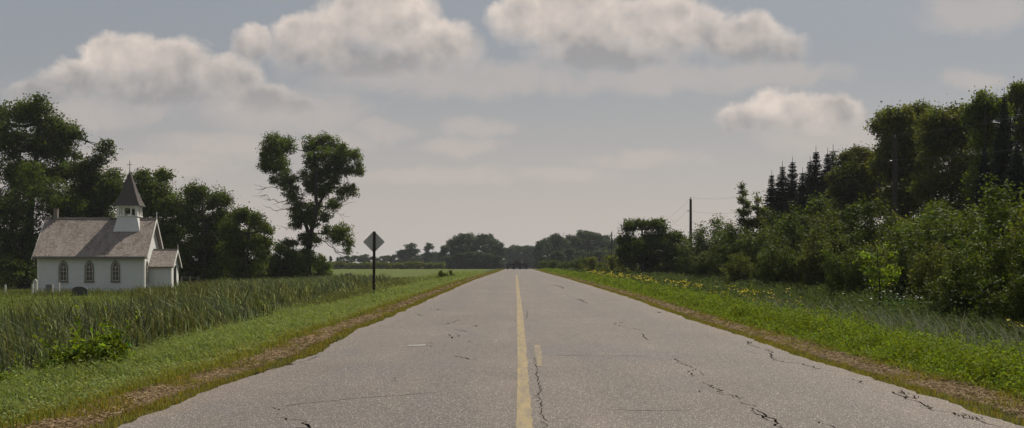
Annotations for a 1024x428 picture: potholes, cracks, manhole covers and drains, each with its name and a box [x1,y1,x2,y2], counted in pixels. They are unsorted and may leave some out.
crack [892,391,1003,427]
crack [673,356,782,428]
crack [534,358,548,428]
crack [270,378,421,428]
